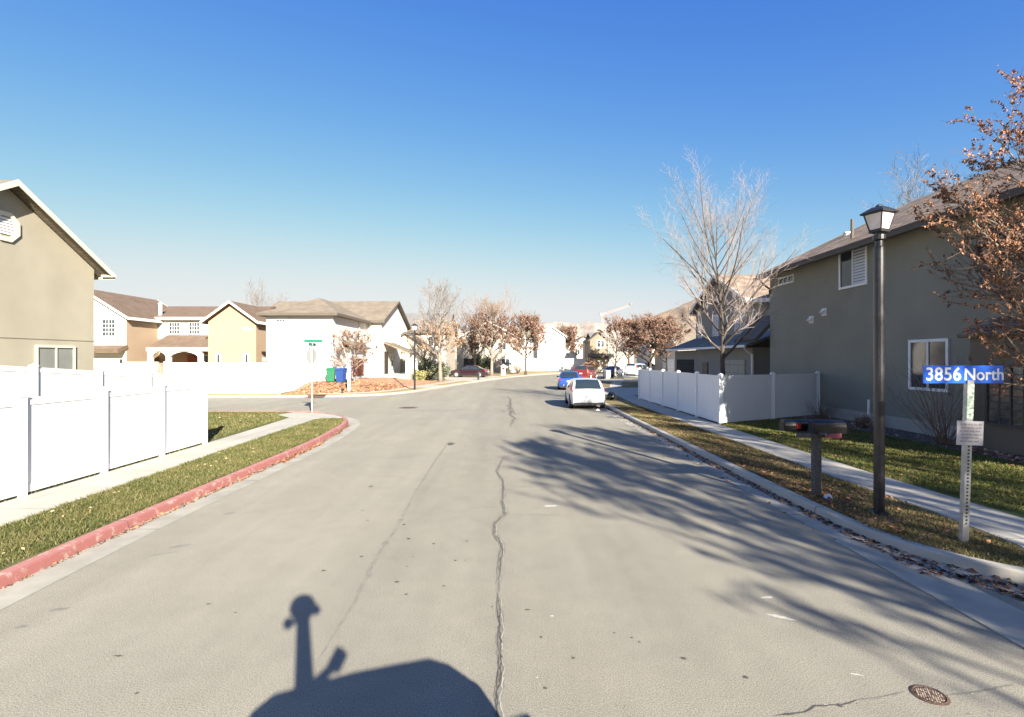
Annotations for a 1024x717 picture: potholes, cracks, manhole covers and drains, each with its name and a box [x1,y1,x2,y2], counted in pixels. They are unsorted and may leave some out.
crack [773,691,905,716]
manhole cover [909,685,951,706]
crack [480,444,528,717]
crack [502,396,516,427]
